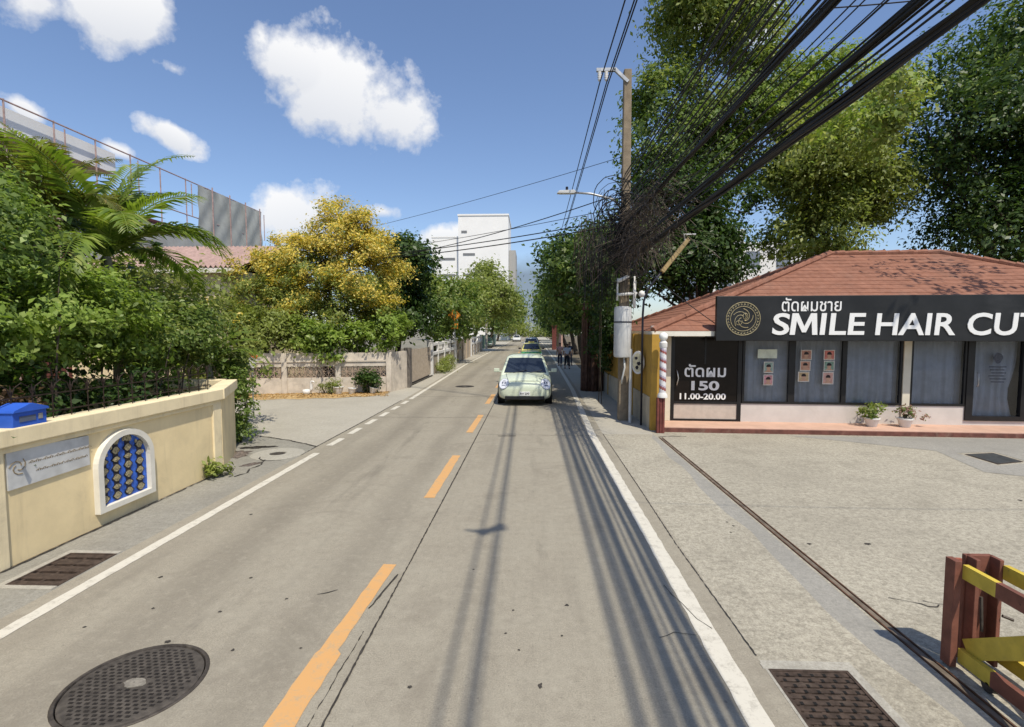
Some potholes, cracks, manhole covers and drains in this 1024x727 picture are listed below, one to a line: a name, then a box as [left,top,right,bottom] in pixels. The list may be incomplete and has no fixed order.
crack [603,434,756,655]
crack [307,631,364,727]
drain grate [760,663,910,727]
drain grate [0,550,122,590]
manhole cover [47,644,210,727]
manhole cover [250,448,305,460]
crack [368,574,398,608]
